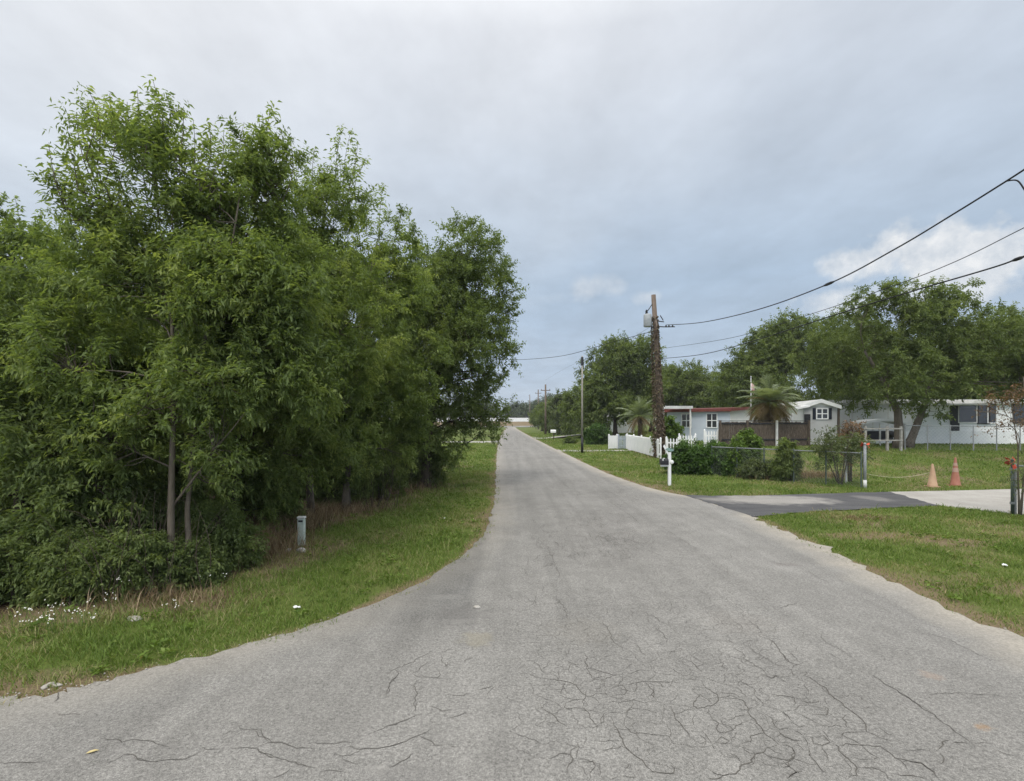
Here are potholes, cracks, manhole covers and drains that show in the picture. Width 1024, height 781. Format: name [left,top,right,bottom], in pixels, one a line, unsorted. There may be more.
crack [487,478,1022,779]
crack [97,738,219,762]
crack [227,649,491,778]
